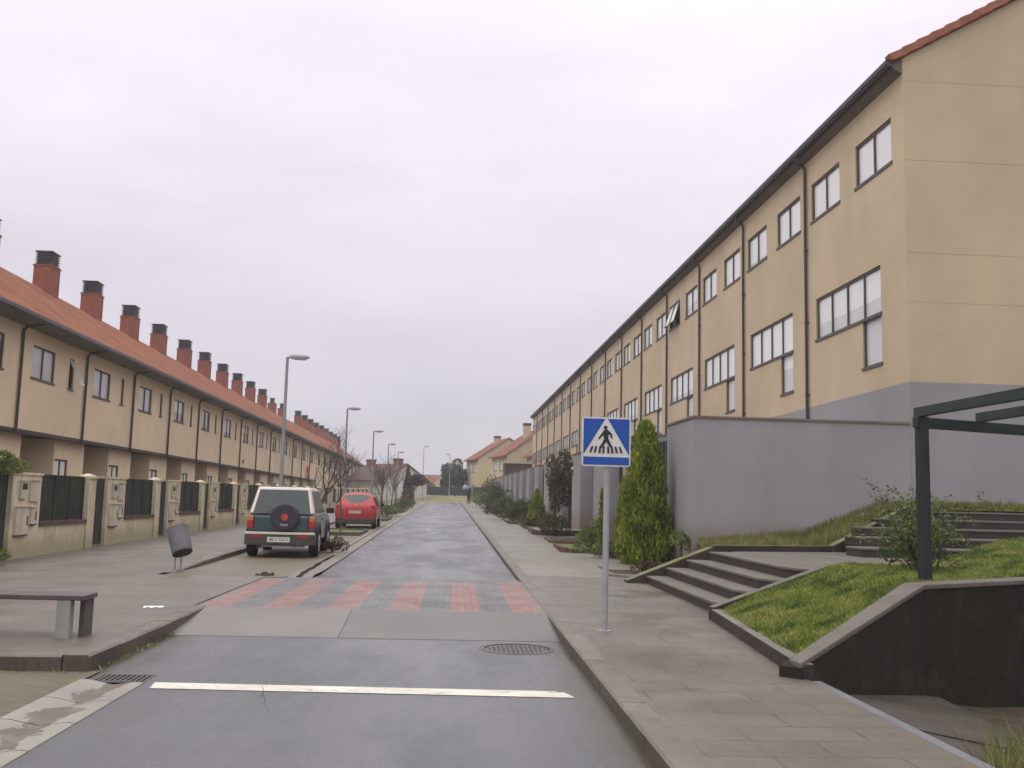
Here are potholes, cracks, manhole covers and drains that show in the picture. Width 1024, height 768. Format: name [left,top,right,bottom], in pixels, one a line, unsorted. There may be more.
drain grate [92,674,156,684]
manhole cover [479,643,555,655]
